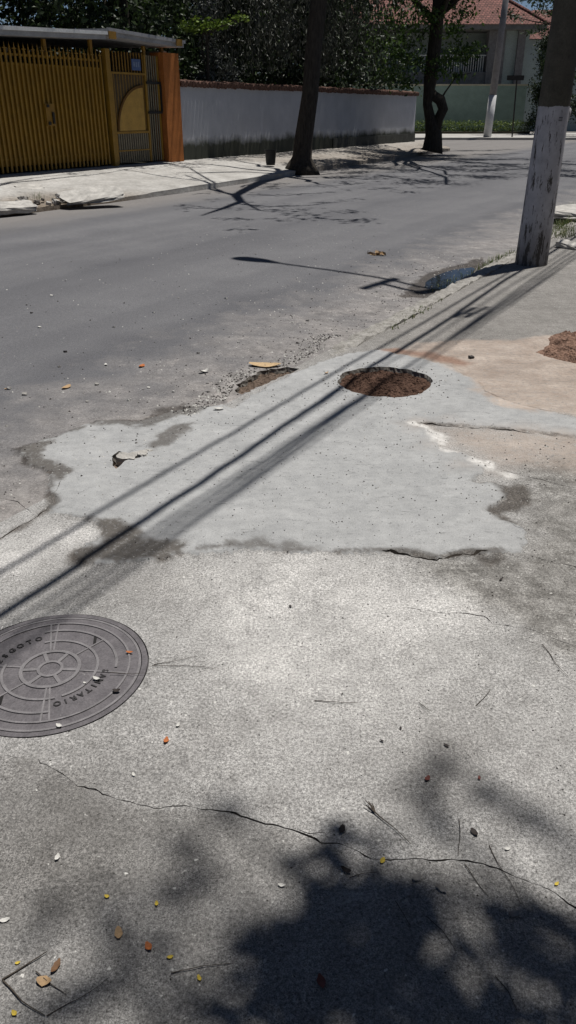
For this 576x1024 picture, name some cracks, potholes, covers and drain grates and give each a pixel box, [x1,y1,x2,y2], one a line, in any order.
manhole cover [0,614,149,738]
crack [6,755,576,909]
pothole [337,367,433,397]
pothole [235,367,298,394]
